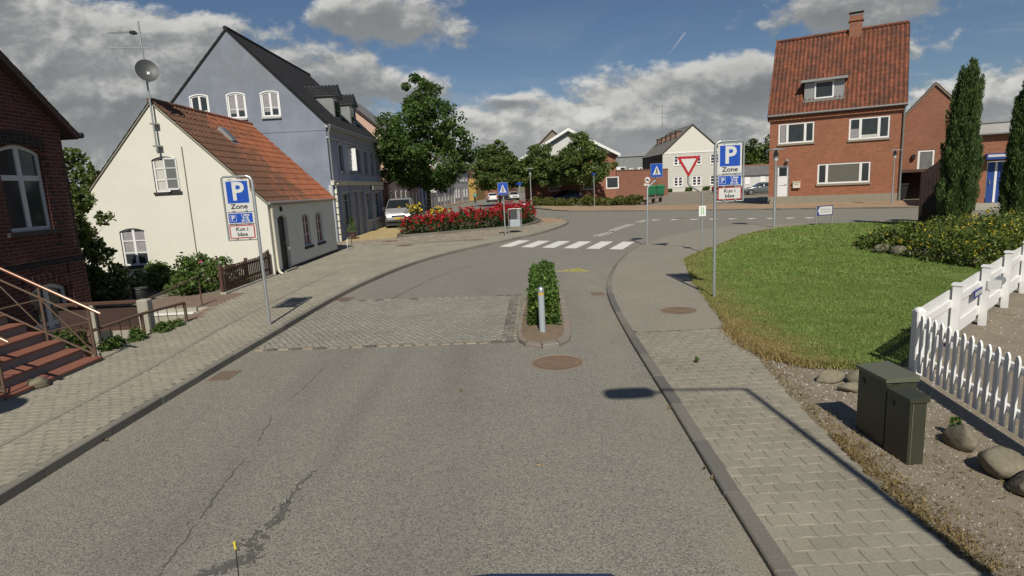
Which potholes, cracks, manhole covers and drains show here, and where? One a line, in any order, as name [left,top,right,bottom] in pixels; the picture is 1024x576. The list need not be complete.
crack [158,418,317,576]
manhole cover [659,306,698,314]
manhole cover [530,354,585,371]
